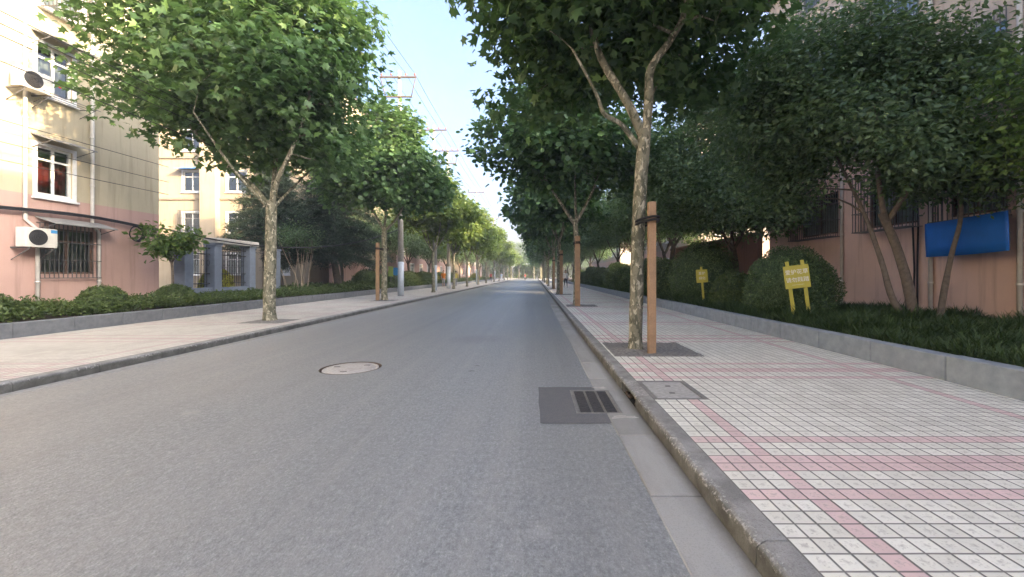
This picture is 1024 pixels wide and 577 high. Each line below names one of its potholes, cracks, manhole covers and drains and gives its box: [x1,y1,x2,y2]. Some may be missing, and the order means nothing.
utility cover [637,381,709,400]
manhole cover [319,362,382,375]
drain grate [570,387,639,419]
